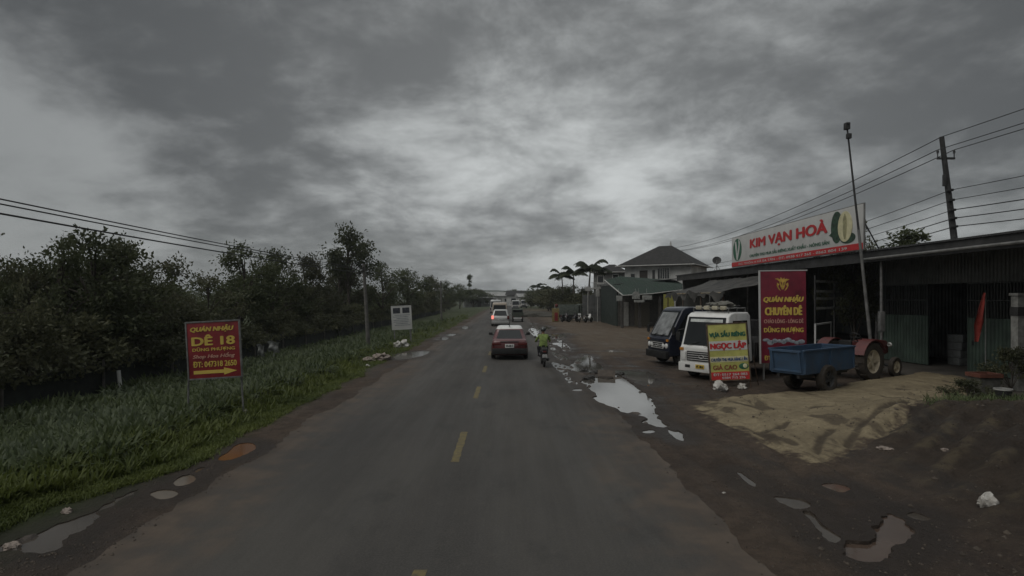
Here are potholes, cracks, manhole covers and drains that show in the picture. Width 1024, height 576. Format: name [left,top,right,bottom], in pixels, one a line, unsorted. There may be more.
pothole [580,374,670,427]
pothole [842,513,915,562]
pothole [0,489,139,554]
pothole [173,474,196,486]
pothole [668,429,685,441]
pothole [394,351,430,360]
pothole [774,496,811,509]
pothole [218,442,256,461]
pothole [821,483,851,492]
pothole [150,489,178,499]
